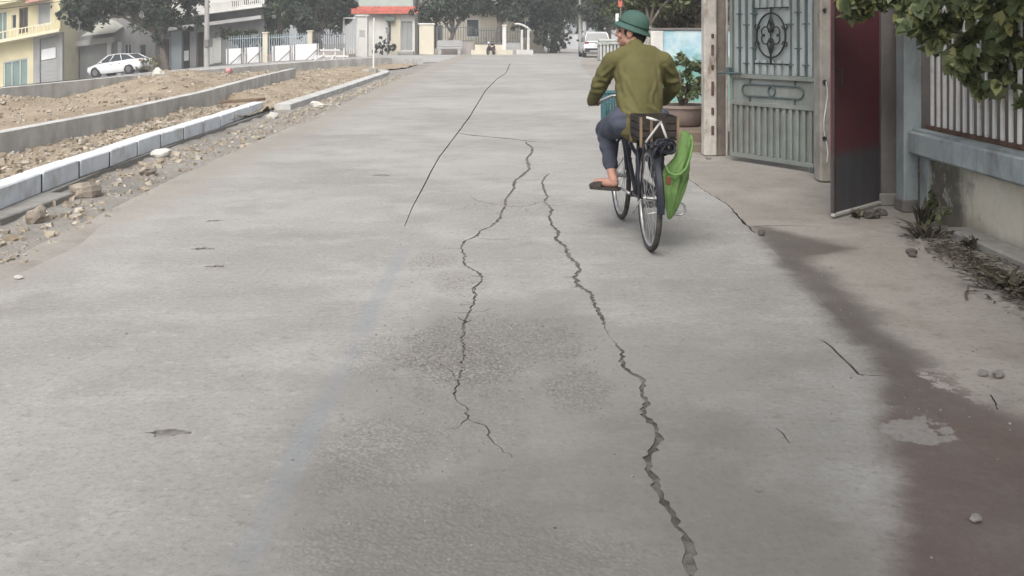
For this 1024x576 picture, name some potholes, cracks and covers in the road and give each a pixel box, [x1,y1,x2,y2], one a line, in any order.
crack [817,338,880,376]
crack [405,64,697,576]
pothole [145,429,192,437]
